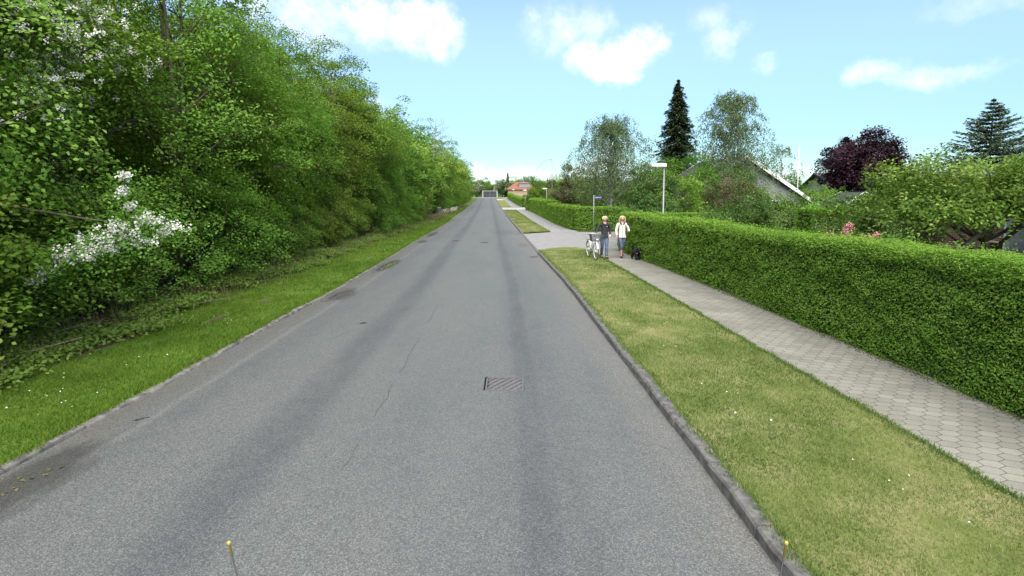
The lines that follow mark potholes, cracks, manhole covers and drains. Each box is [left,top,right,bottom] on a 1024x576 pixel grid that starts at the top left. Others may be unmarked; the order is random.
crack [342,307,437,469]
